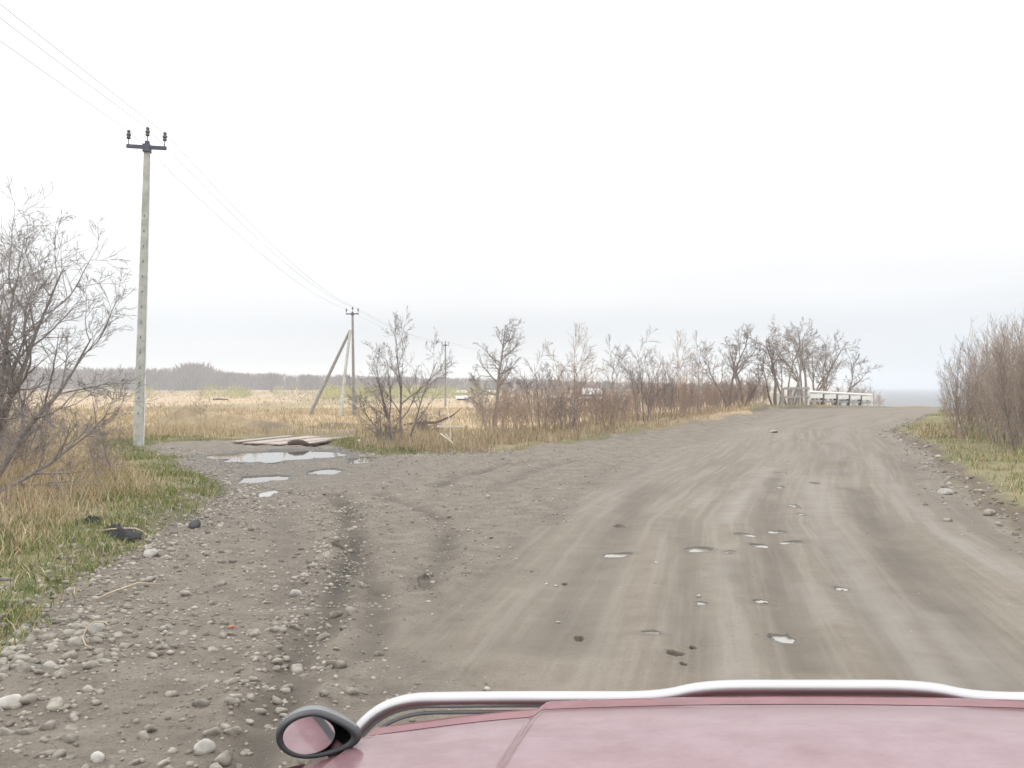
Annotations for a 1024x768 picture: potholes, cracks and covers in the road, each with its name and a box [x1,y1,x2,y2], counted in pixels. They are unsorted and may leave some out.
pothole [758,632,804,646]
pothole [410,572,437,591]
pothole [299,467,355,475]
pothole [595,551,642,559]
pothole [632,628,672,637]
pothole [232,474,298,484]
pothole [657,647,695,660]
pothole [825,585,858,593]
pothole [193,448,359,464]
pothole [565,634,592,645]
pothole [741,541,777,550]
pothole [677,545,721,554]
